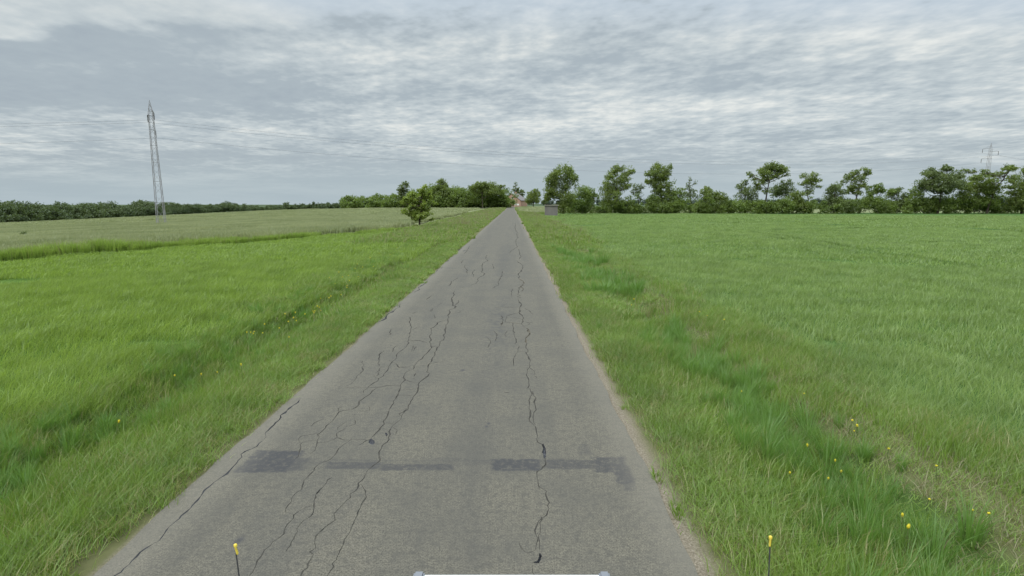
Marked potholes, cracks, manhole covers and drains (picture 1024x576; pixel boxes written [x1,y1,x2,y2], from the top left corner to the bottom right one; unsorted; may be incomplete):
crack [114,401,299,576]
crack [249,224,550,576]
